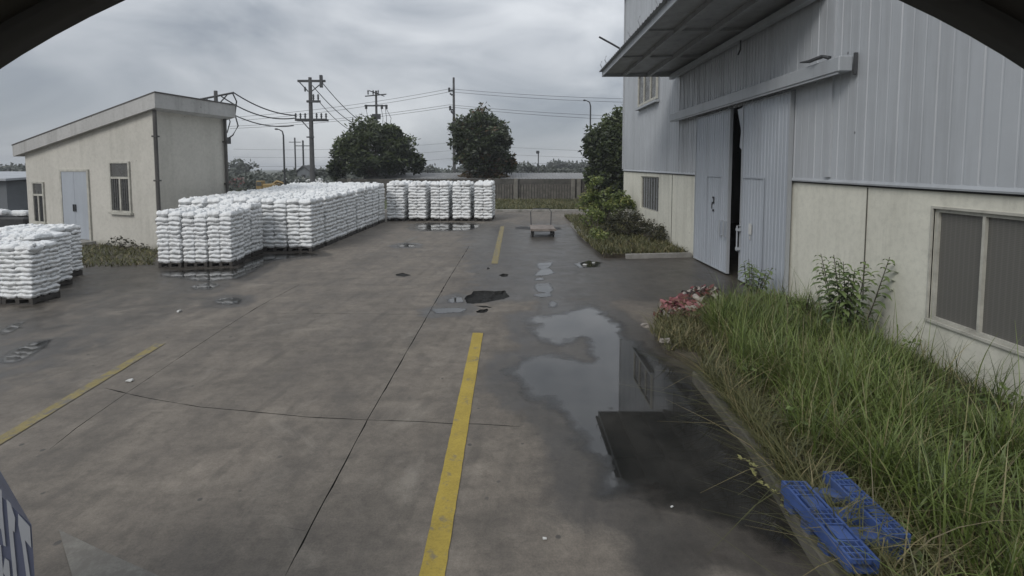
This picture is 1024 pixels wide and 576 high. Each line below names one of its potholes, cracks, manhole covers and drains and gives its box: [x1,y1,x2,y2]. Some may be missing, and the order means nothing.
pothole [465,290,509,304]
